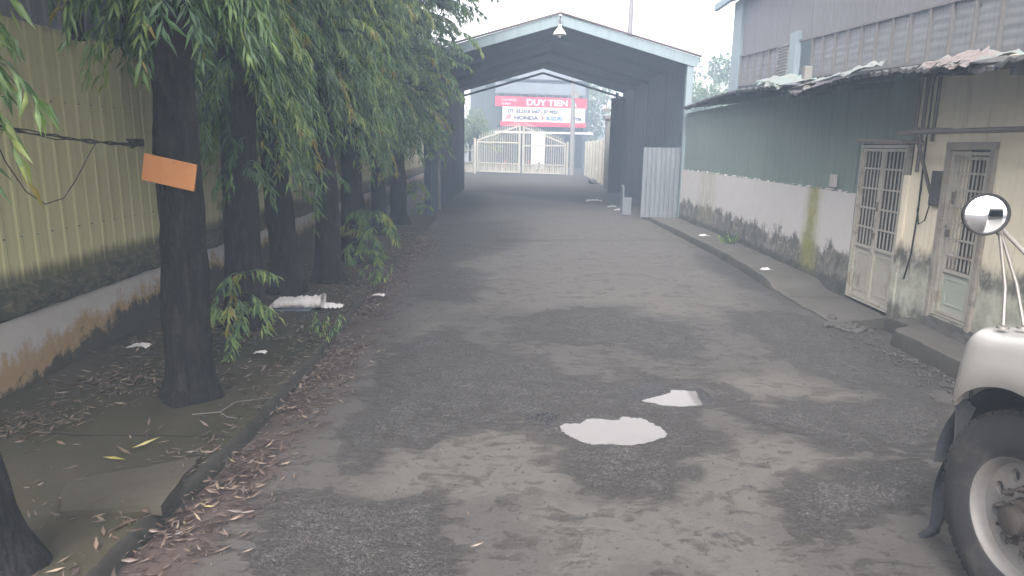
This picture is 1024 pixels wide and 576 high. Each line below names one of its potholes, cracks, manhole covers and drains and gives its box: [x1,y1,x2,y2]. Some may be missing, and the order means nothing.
pothole [623,387,714,407]
pothole [557,415,671,446]
